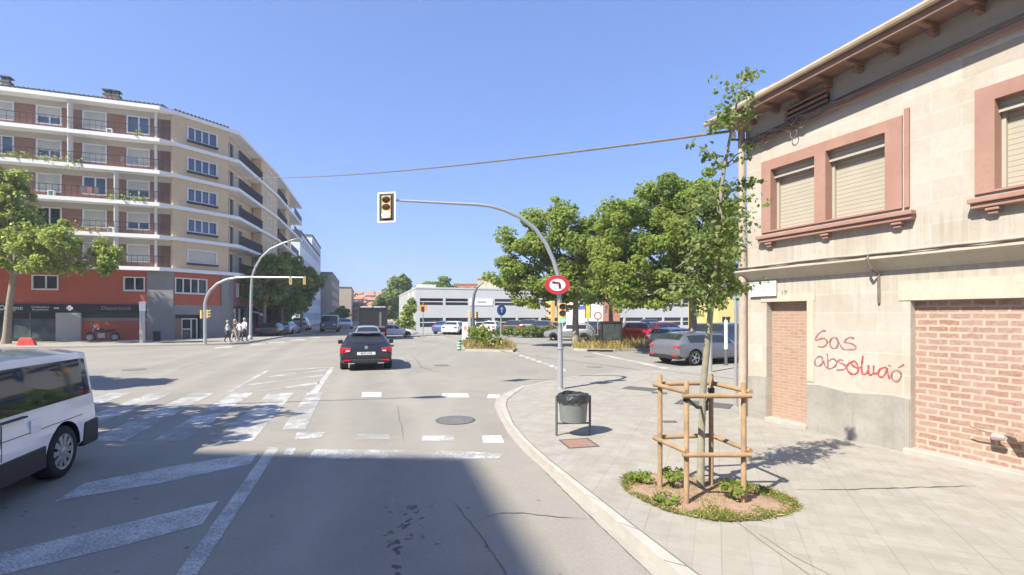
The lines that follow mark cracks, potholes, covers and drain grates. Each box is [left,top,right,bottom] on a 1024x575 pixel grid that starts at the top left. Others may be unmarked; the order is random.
utility cover [559,438,600,448]
manhole cover [435,416,475,425]
